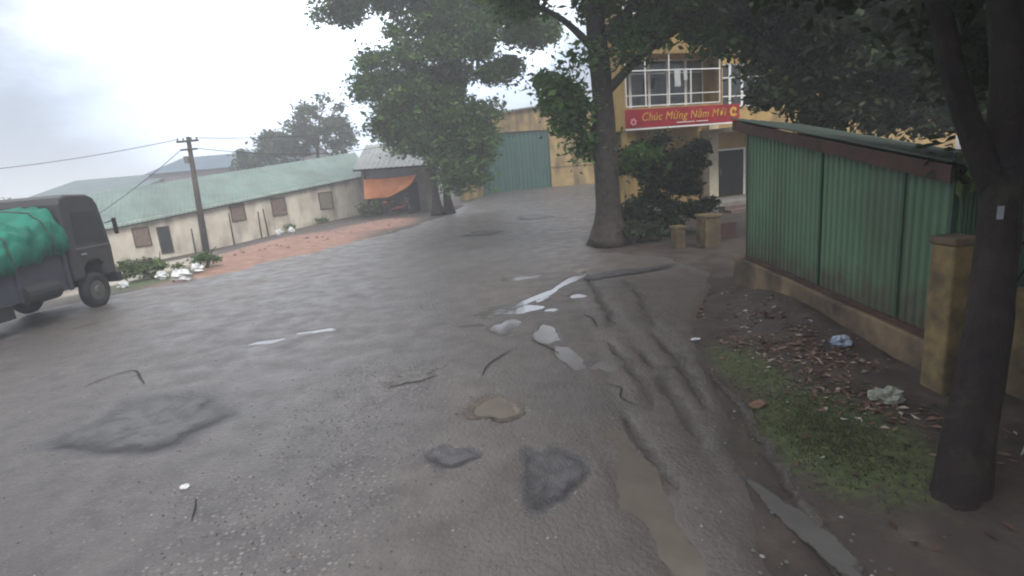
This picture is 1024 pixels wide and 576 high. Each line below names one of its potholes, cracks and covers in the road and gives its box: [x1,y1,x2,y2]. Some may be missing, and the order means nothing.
pothole [465,394,526,424]
crack [84,370,144,387]
